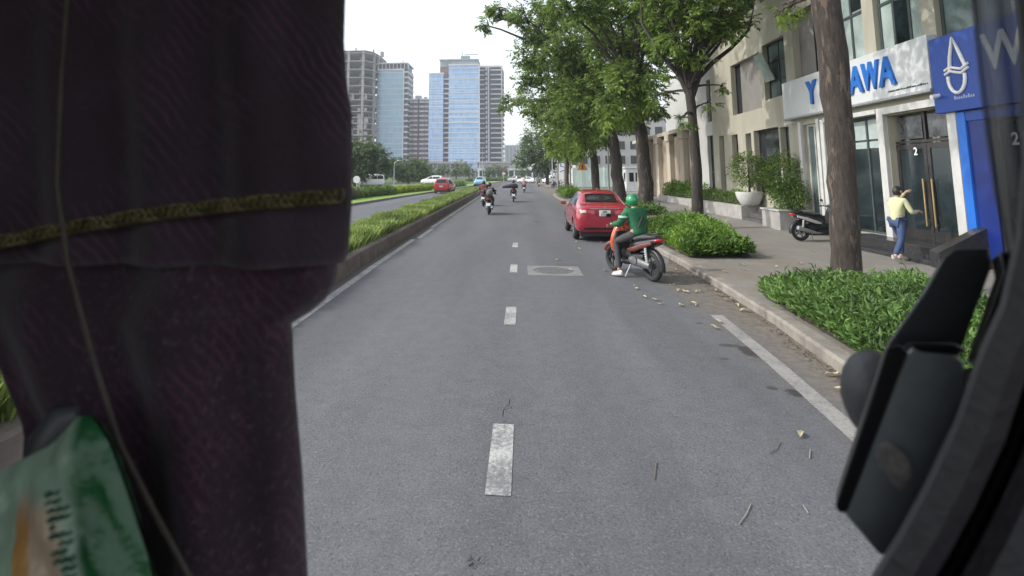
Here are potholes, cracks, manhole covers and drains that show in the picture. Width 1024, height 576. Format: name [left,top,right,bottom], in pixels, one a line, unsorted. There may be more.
manhole cover [527,266,584,276]
crack [497,396,517,421]
